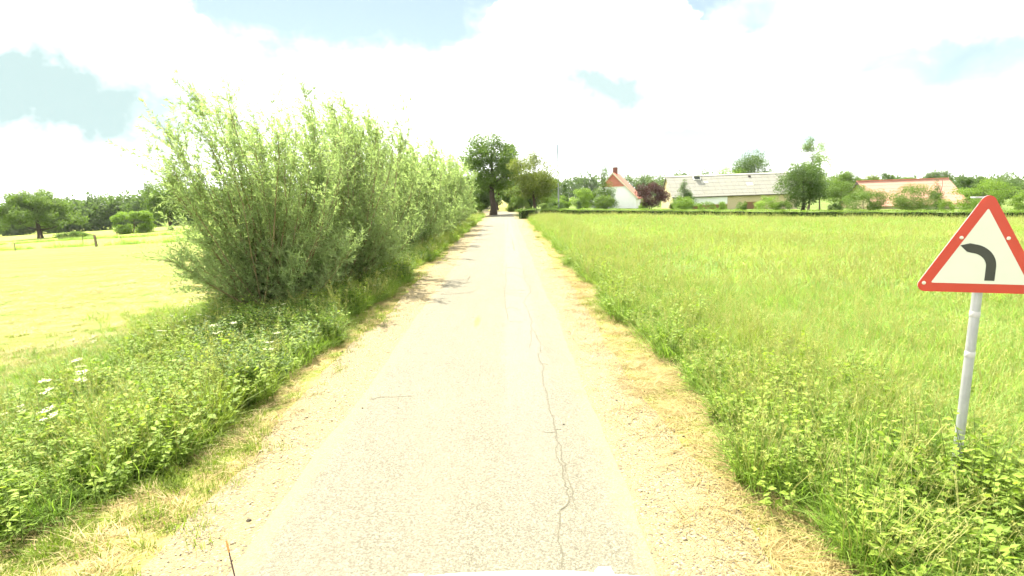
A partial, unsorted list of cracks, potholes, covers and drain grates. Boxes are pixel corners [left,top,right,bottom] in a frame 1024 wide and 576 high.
crack [504,267,576,571]
